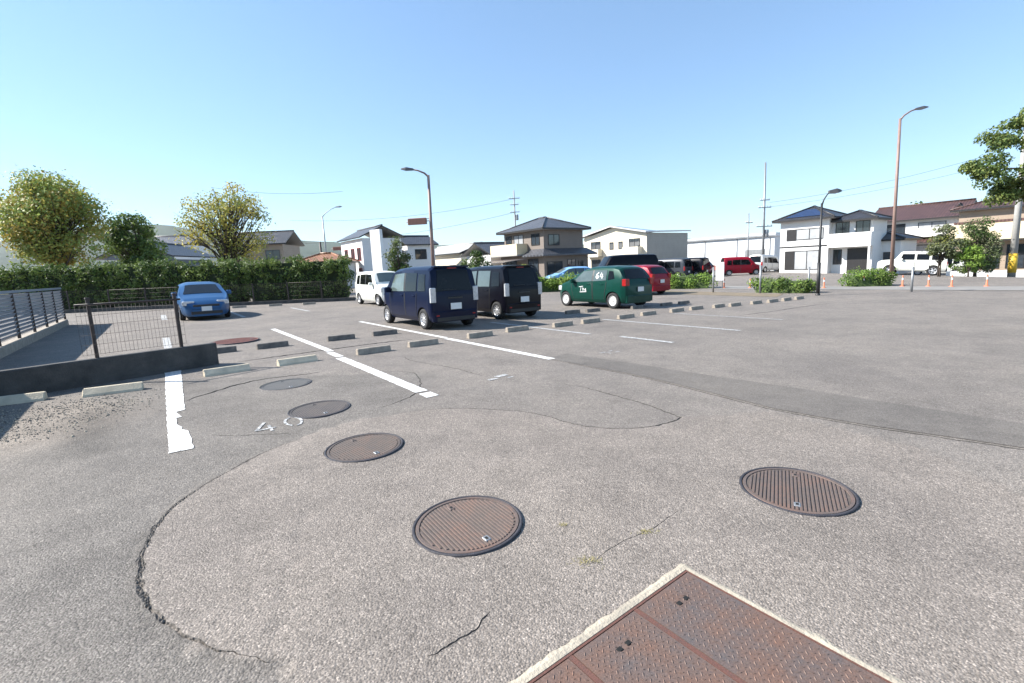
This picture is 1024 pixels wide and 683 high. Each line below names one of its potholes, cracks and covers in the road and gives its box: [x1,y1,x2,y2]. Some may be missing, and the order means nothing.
crack [184,371,325,402]
manhole cover [287,400,351,419]
crack [135,433,300,663]
manhole cover [214,337,260,345]
crack [591,512,676,564]
utility cover [509,563,904,683]
crack [426,612,490,657]
manhole cover [739,467,860,517]
manhole cover [324,433,404,463]
manhole cover [259,378,312,390]
manhole cover [412,495,523,558]
crack [376,357,482,409]
